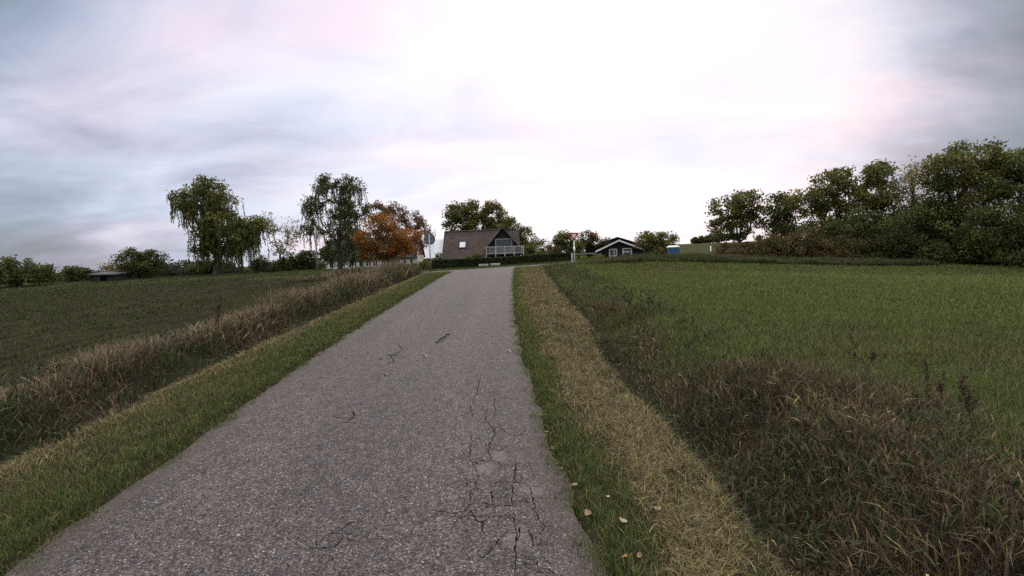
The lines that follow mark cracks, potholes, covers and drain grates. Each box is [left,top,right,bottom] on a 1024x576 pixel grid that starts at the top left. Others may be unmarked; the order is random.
crack [427,377,554,576]
crack [298,521,364,550]
